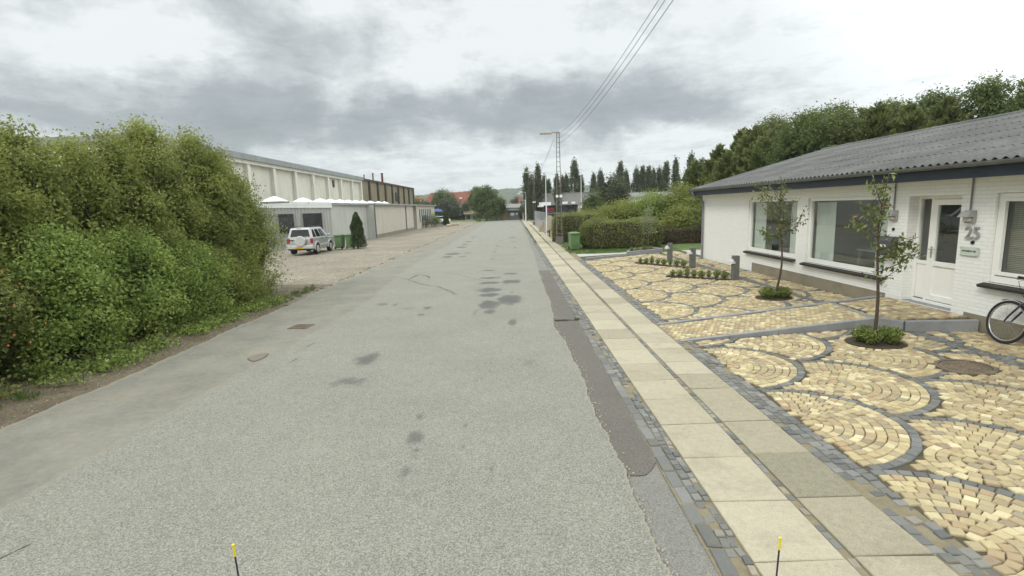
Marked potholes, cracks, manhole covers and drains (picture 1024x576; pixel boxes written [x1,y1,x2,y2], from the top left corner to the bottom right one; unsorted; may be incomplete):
manhole cover [933,359,999,376]
